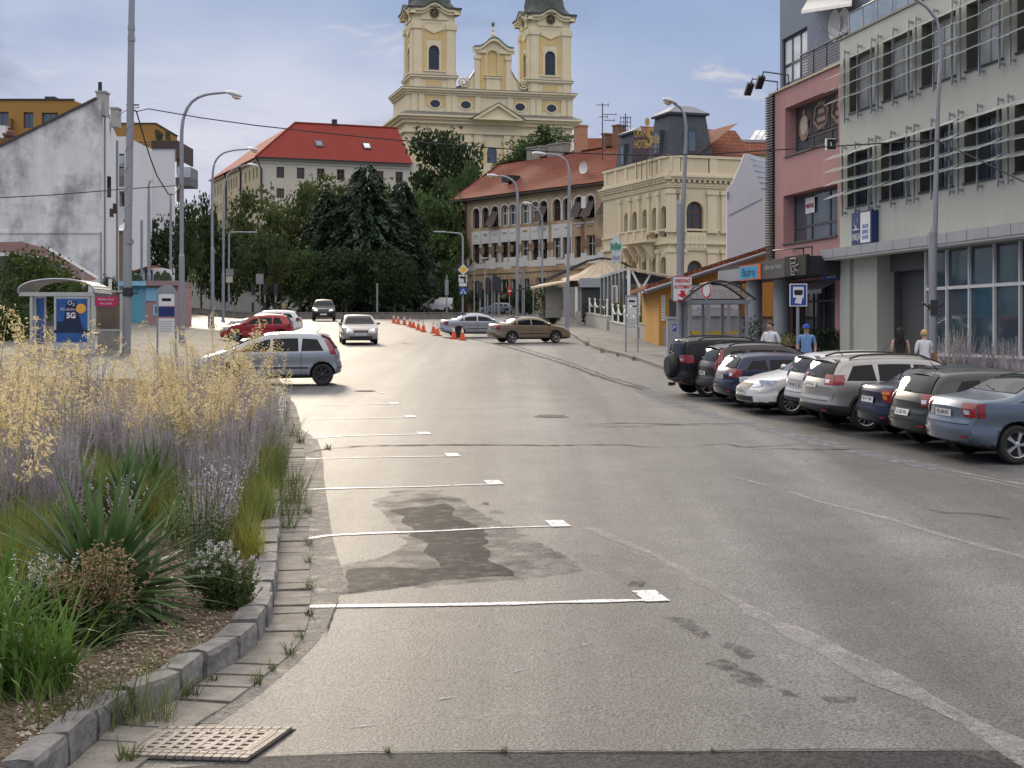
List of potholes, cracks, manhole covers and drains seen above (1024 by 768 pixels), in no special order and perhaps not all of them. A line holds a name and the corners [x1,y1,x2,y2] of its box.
drain grate [126,726,296,762]
